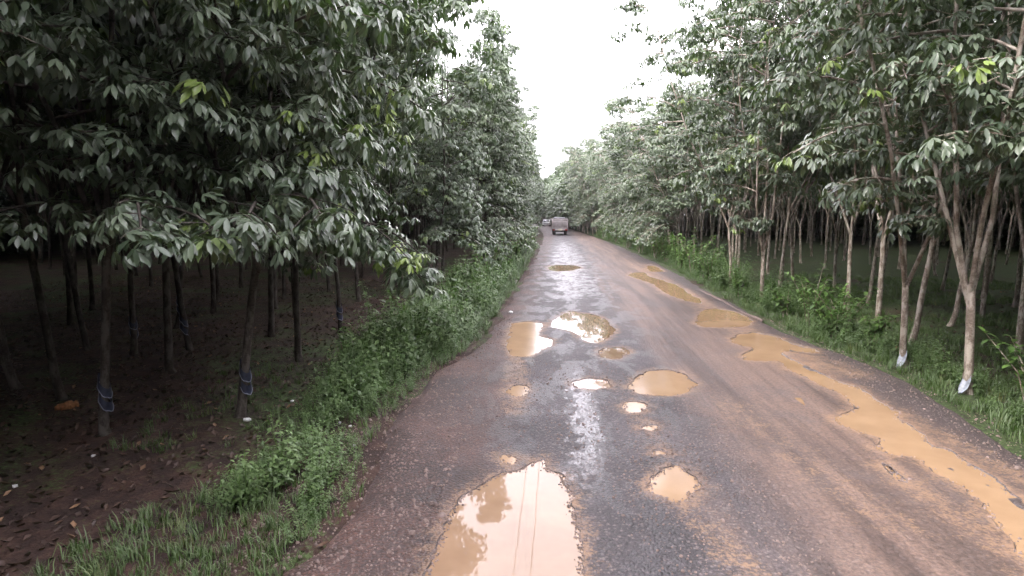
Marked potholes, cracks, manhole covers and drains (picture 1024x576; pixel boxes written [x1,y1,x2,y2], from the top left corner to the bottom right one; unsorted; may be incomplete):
pothole [628,272,702,304]
pothole [645,463,702,503]
pothole [695,308,754,327]
pothole [422,458,585,576]
pothole [730,332,1024,558]
pothole [598,347,631,359]
pothole [627,369,699,396]
pothole [506,321,554,357]
pothole [505,384,530,397]
pothole [551,311,617,343]
pothole [572,377,611,389]
pothole [622,401,648,413]
